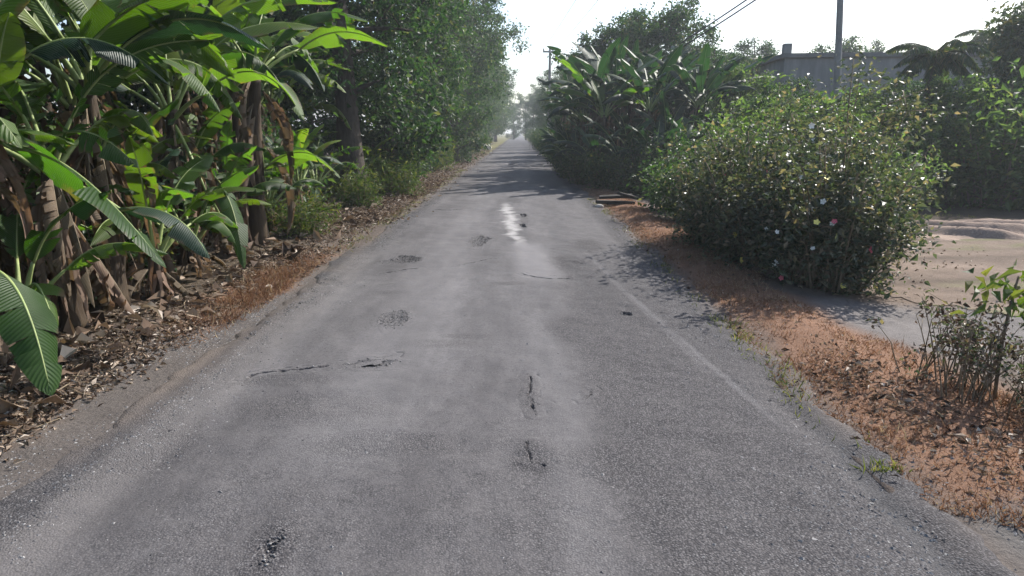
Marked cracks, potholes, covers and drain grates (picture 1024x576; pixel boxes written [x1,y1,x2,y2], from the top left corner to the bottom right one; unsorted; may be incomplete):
pothole [369,306,417,333]
pothole [374,254,426,265]
pothole [465,233,495,250]
crack [516,370,602,420]
crack [232,351,403,382]
crack [516,272,577,281]
crack [513,437,560,474]
